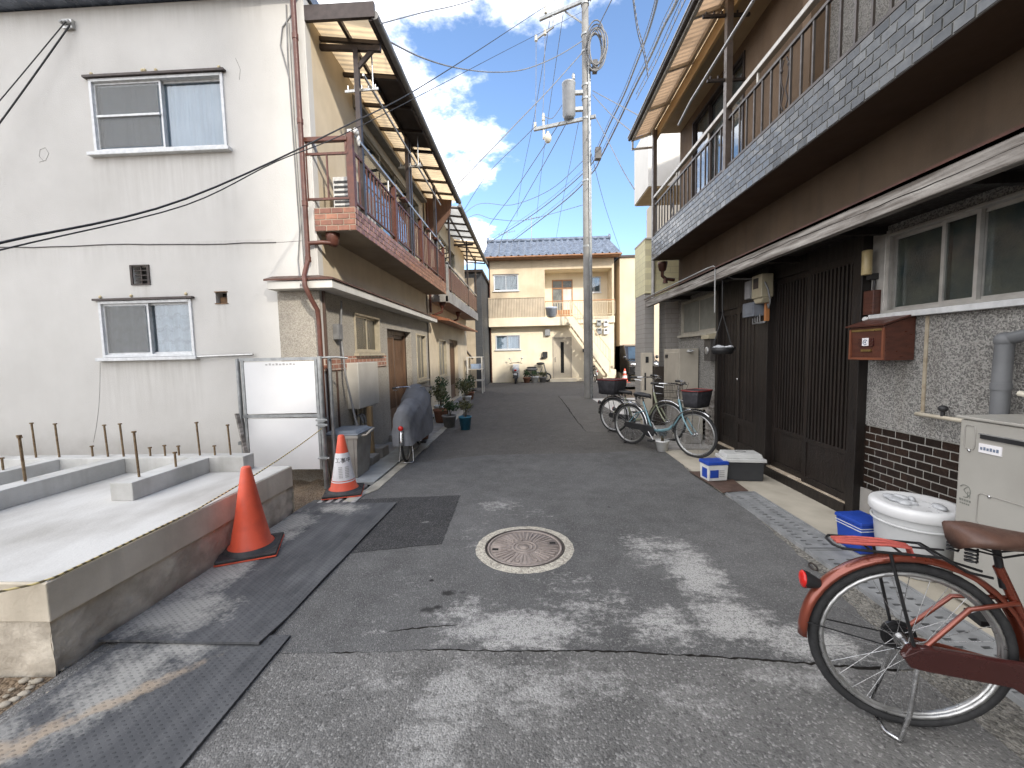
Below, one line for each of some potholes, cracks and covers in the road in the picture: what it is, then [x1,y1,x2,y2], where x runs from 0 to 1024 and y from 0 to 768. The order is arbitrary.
manhole cover [475,526,574,574]
drain grate [724,491,845,551]
